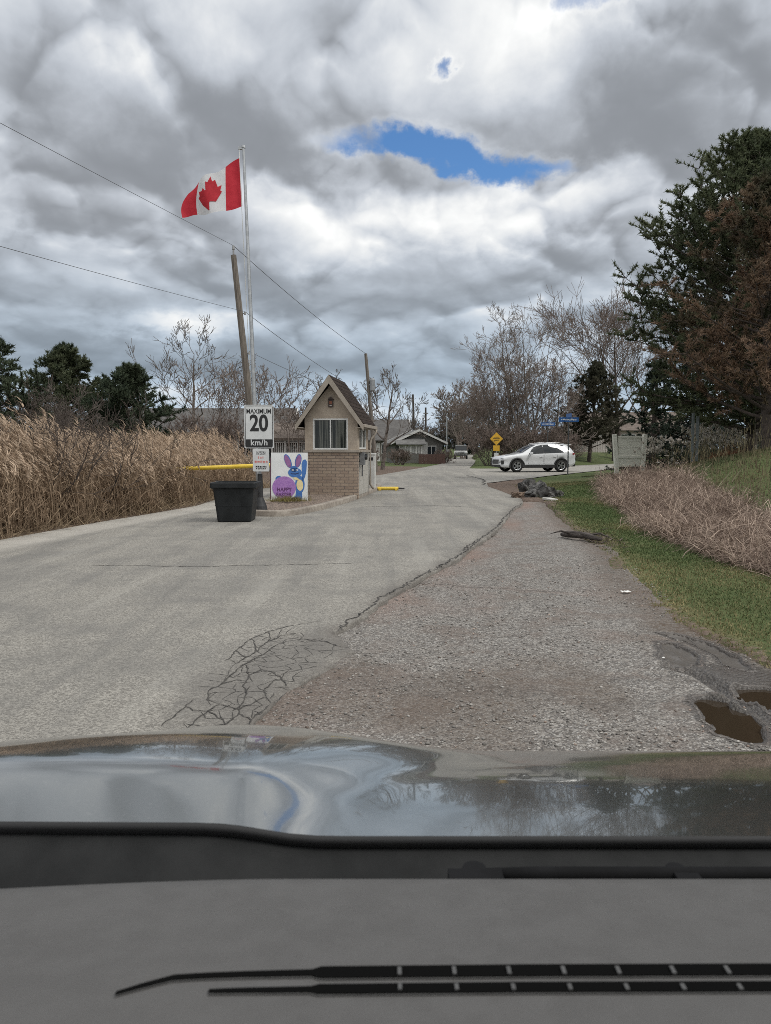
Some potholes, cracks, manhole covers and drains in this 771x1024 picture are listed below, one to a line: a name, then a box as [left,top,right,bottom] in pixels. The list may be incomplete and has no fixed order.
crack [334,503,557,630]
crack [161,622,352,728]
pothole [687,692,771,747]
pothole [727,681,771,715]
